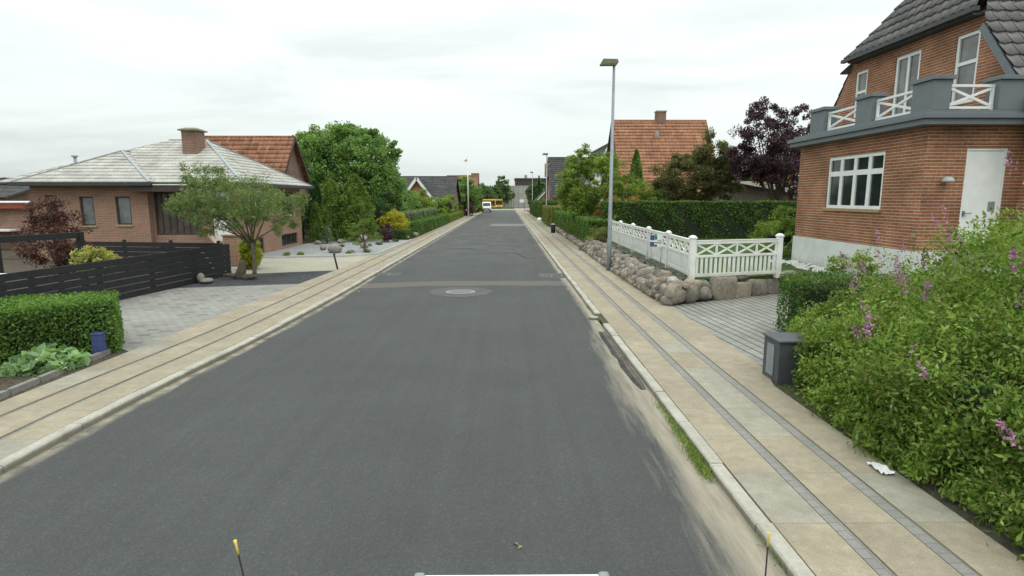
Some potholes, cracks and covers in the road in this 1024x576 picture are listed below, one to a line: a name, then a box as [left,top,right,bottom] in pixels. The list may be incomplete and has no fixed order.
manhole cover [430,287,493,297]
